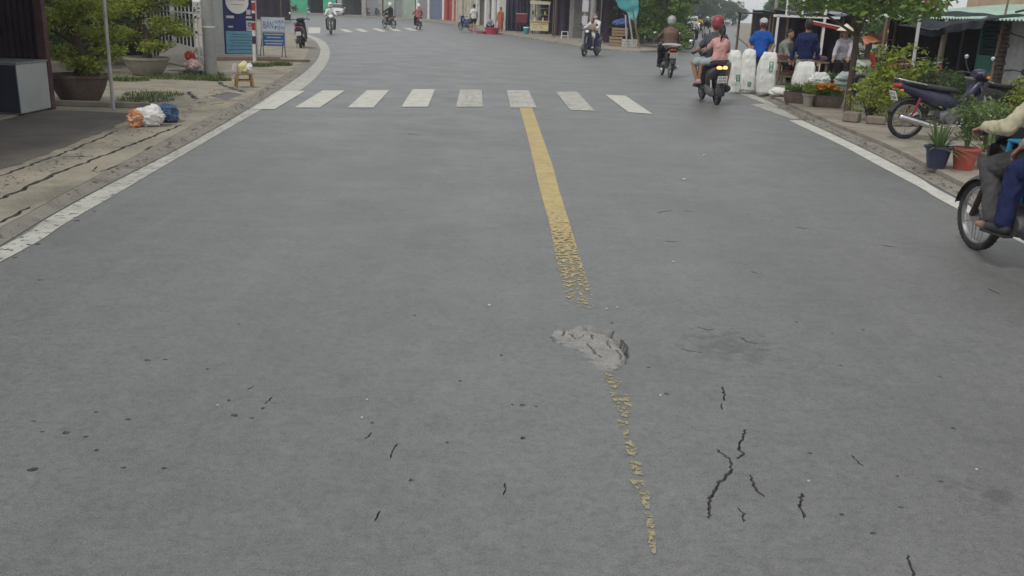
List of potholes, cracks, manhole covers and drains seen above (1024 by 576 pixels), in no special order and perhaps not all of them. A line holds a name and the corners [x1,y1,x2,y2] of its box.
crack [906,554,916,576]
pothole [549,325,632,372]
crack [707,429,765,522]
crack [798,493,806,518]
